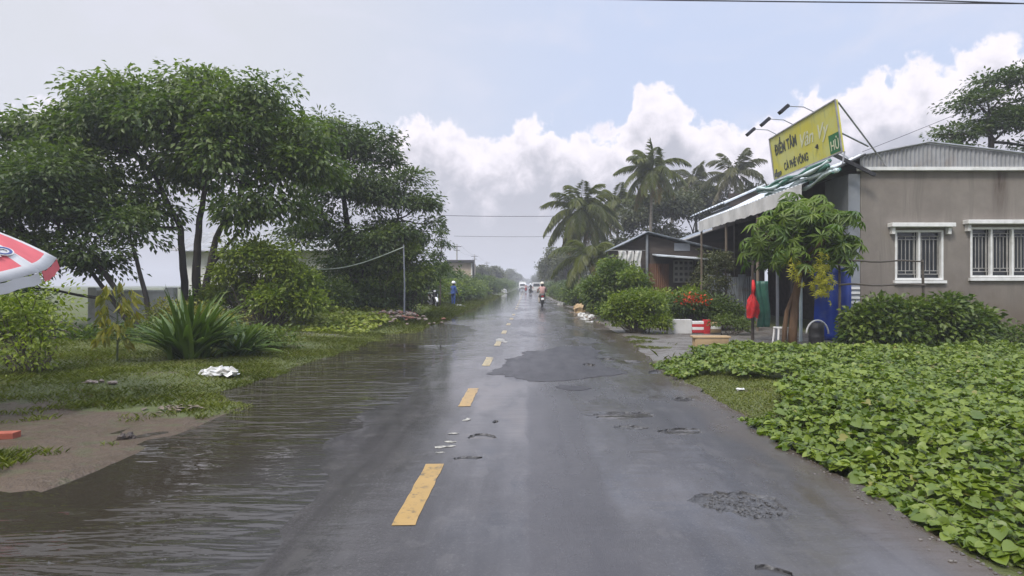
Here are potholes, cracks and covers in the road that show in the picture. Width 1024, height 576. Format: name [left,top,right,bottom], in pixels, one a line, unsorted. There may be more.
pothole [754,564,793,576]
pothole [687,491,795,521]
